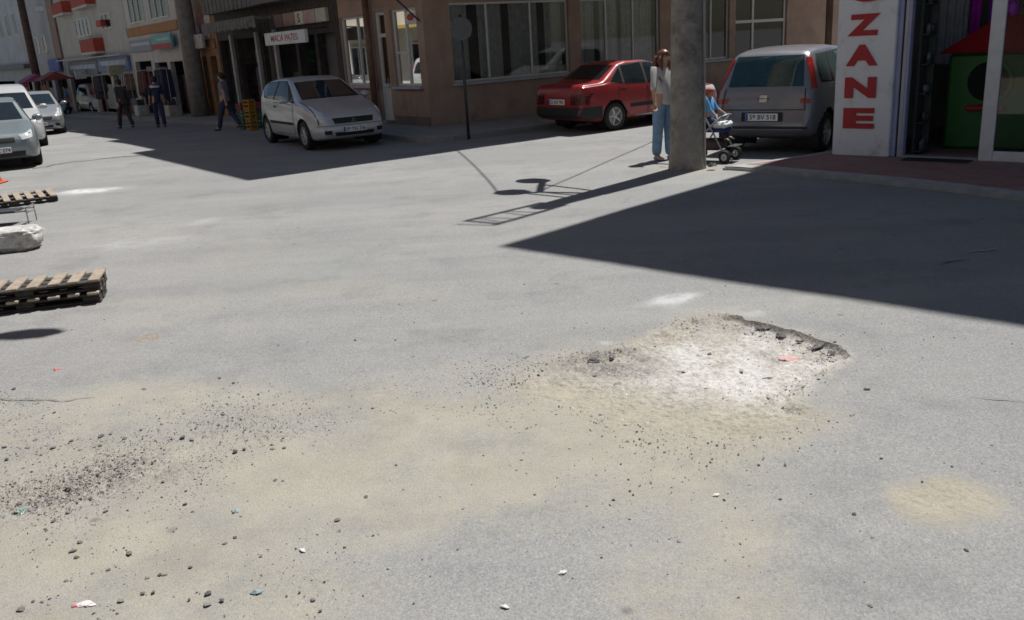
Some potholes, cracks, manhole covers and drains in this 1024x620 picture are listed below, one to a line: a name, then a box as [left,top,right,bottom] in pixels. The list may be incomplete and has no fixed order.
pothole [520,313,851,443]
